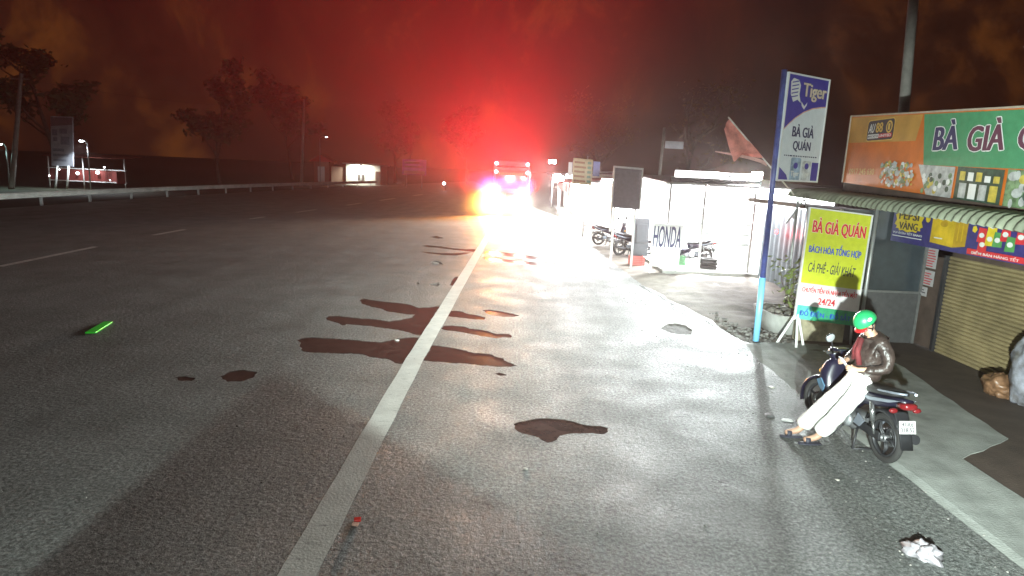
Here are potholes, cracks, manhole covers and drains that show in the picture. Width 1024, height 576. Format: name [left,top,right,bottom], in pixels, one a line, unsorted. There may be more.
pothole [514,418,608,443]
pothole [423,345,516,367]
pothole [661,323,693,335]
pothole [297,337,420,364]
pothole [441,325,512,338]
pothole [448,311,486,320]
pothole [220,370,257,382]
pothole [326,298,440,336]
